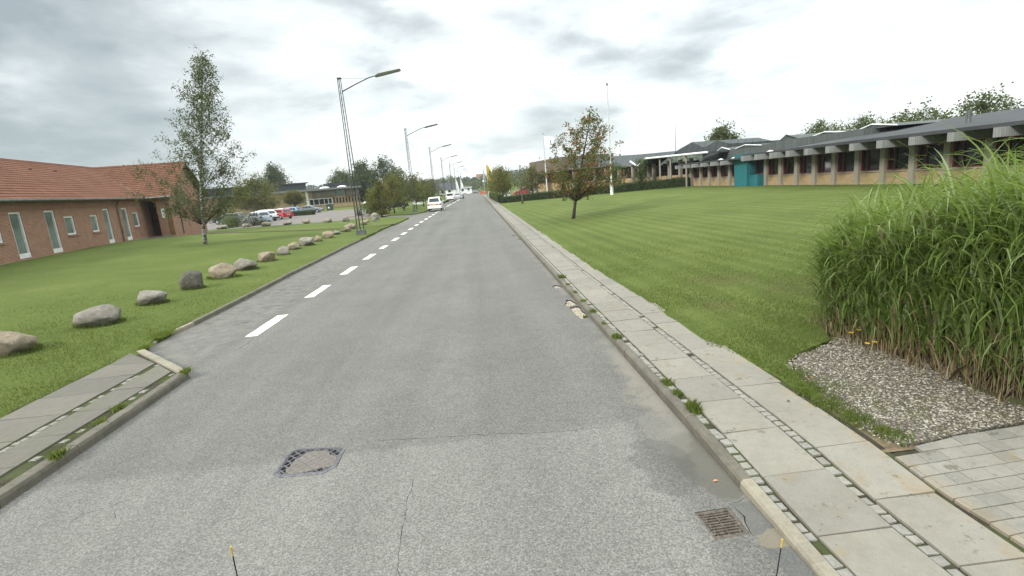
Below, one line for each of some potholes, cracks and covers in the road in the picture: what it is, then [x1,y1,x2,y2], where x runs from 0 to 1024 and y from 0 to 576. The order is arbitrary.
manhole cover [273,446,345,478]
drain grate [695,507,750,540]
pothole [570,306,589,319]
